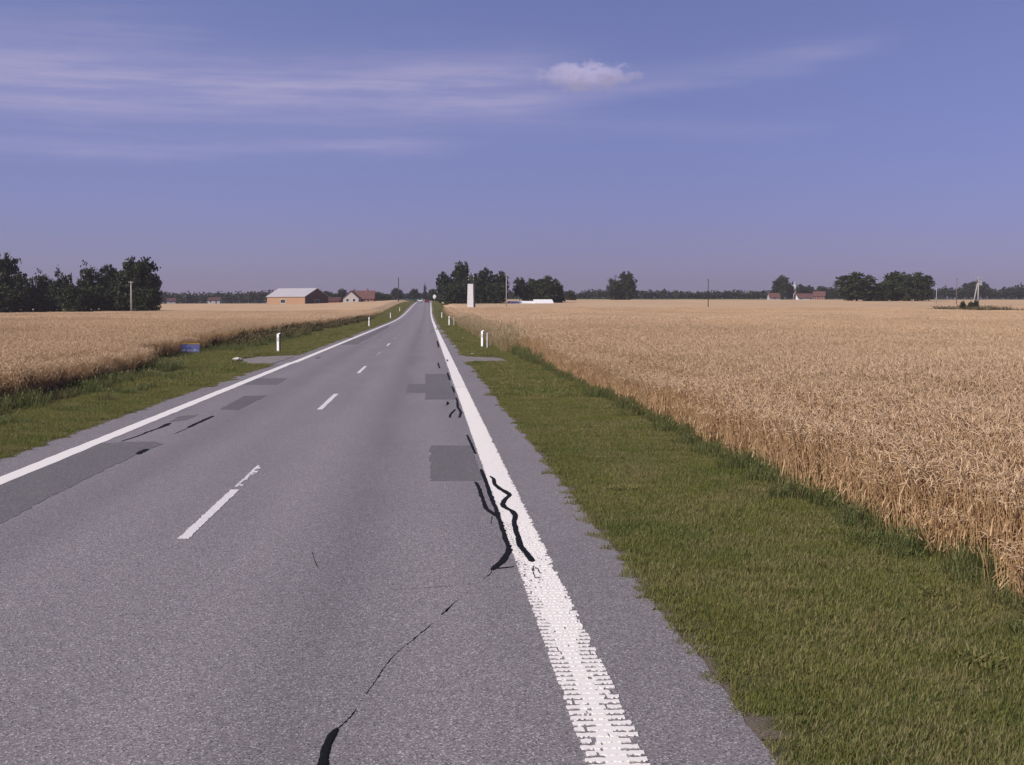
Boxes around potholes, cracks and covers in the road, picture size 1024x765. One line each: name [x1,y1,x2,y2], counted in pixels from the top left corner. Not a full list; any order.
crack [366,583,470,694]
crack [123,423,172,441]
